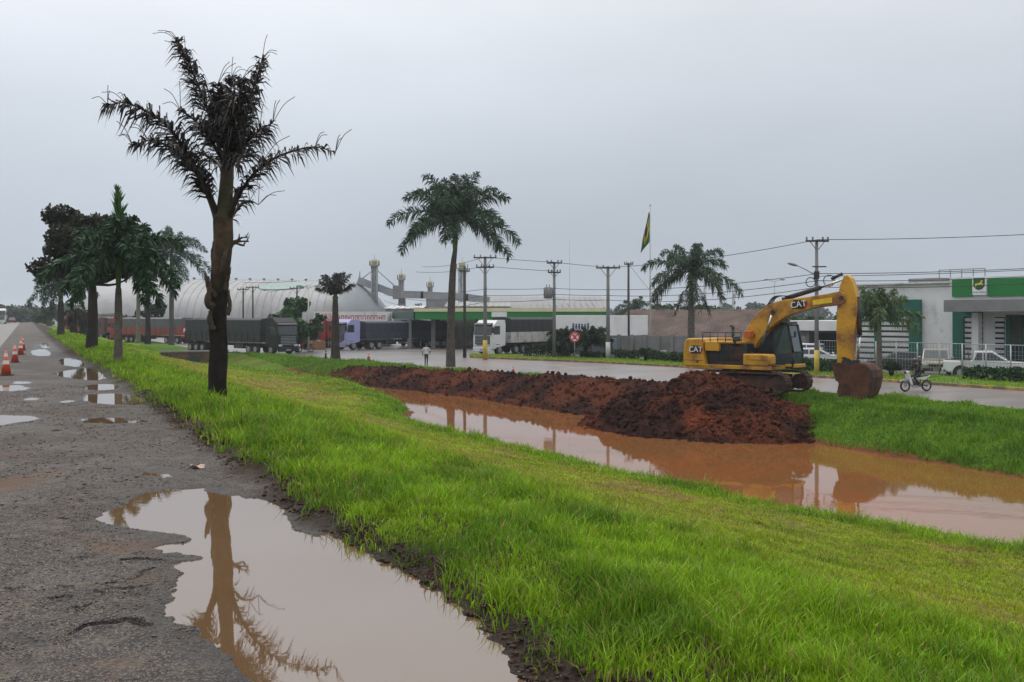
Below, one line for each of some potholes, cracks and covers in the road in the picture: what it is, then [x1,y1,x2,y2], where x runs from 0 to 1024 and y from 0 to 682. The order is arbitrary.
crack [47,556,160,636]
pothole [77,484,570,682]
pothole [37,365,119,381]
pothole [63,390,158,406]
pothole [63,415,167,425]
pothole [65,381,135,391]
pothole [0,413,54,426]
